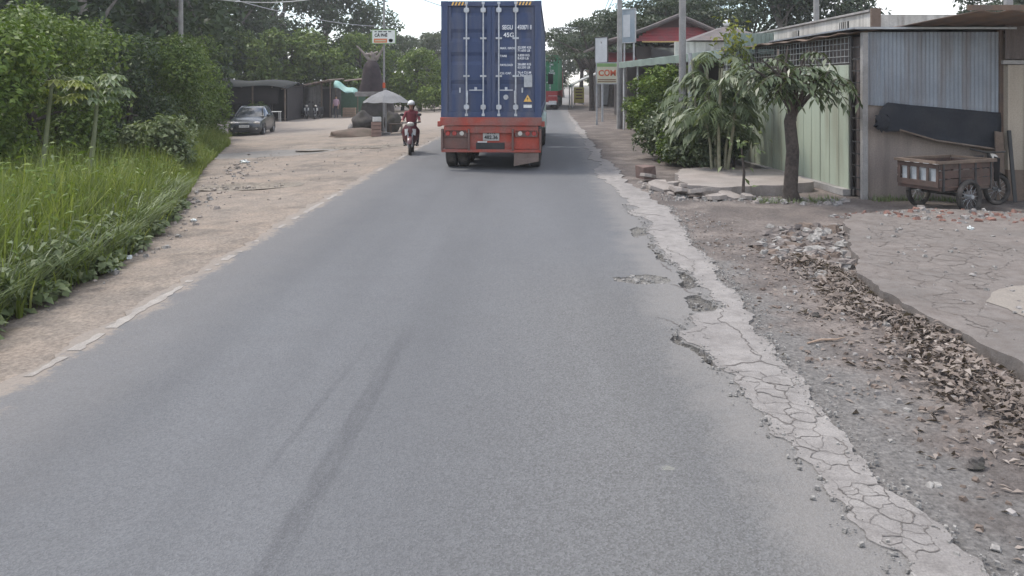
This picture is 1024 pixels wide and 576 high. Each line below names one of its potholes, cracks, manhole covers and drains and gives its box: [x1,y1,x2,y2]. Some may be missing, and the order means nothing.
pothole [612,274,671,285]
crack [663,308,940,556]
pothole [684,295,718,312]
pothole [630,227,648,238]
pothole [670,336,712,367]
